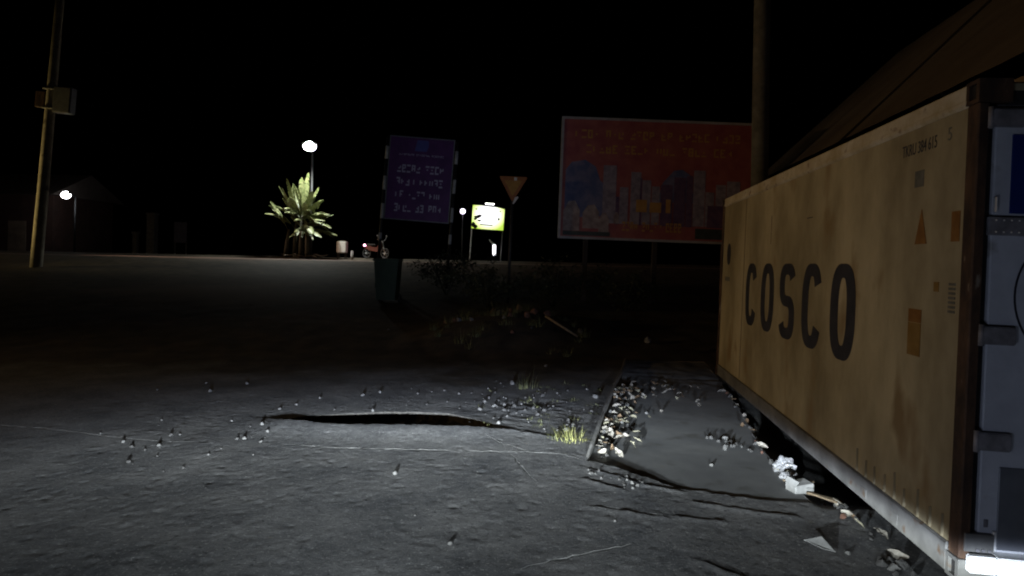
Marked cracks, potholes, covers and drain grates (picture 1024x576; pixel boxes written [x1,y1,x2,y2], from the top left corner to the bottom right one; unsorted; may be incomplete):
crack [521,543,635,569]
crack [589,469,678,490]
